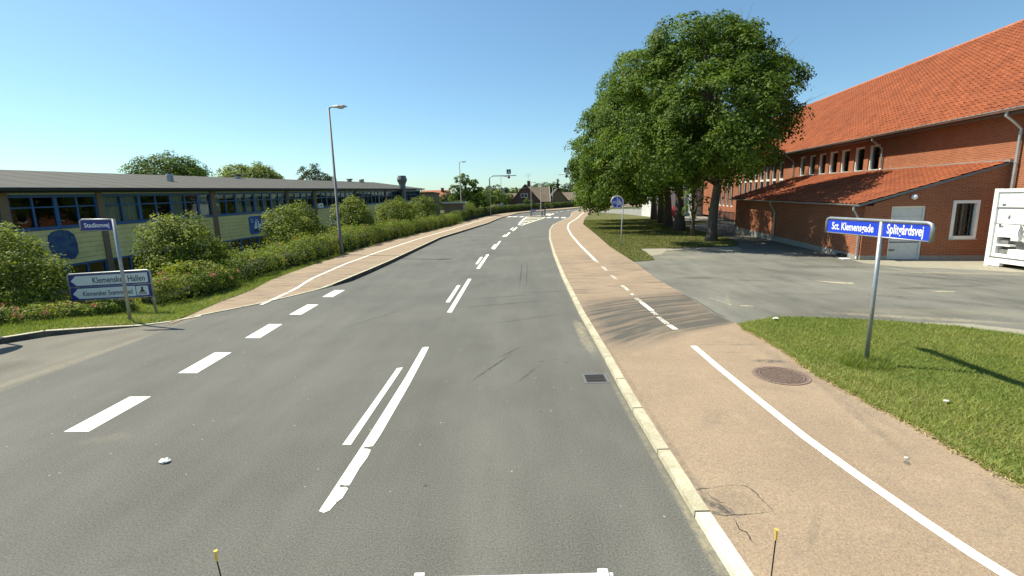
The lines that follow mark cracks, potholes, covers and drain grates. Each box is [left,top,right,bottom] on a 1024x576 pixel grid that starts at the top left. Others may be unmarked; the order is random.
crack [700,485,773,543]
manhole cover [752,366,812,386]
drain grate [582,373,610,384]
